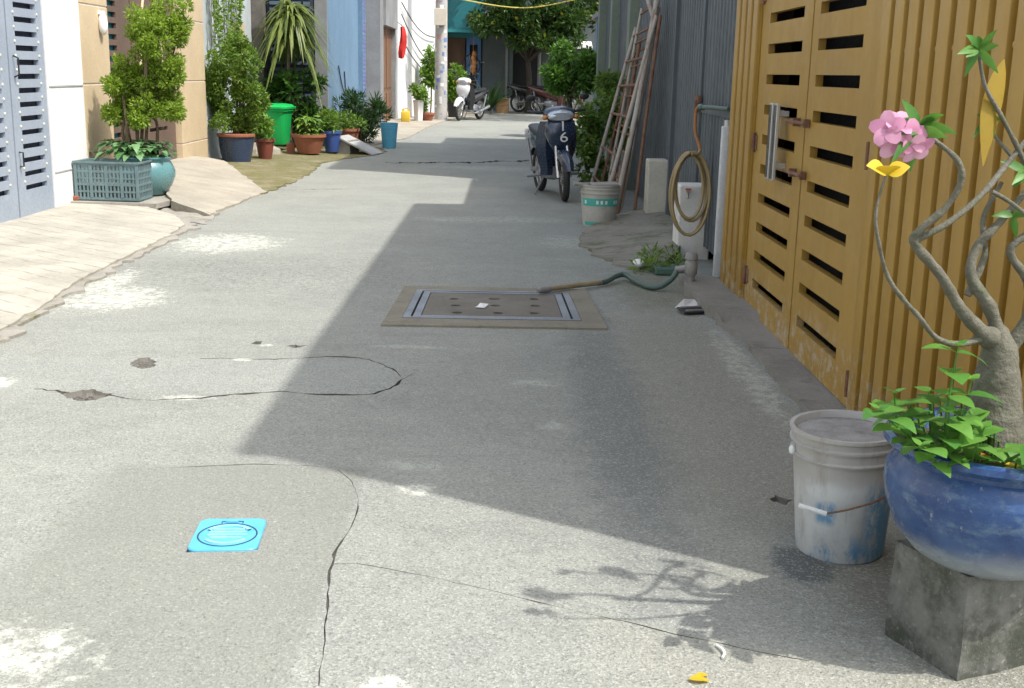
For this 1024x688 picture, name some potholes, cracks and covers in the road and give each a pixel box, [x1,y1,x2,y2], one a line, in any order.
pothole [63,389,113,401]
crack [43,356,412,400]
manhole cover [381,286,607,330]
pothole [130,357,156,369]
crack [318,470,809,686]
